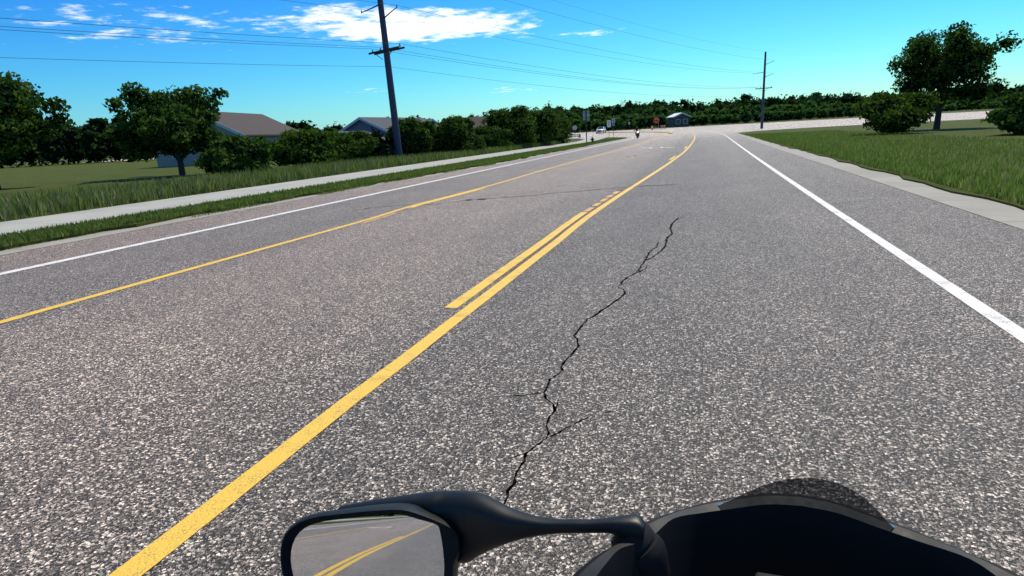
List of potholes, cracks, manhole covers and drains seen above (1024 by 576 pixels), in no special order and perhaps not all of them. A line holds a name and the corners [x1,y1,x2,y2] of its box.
crack [504,218,679,504]
